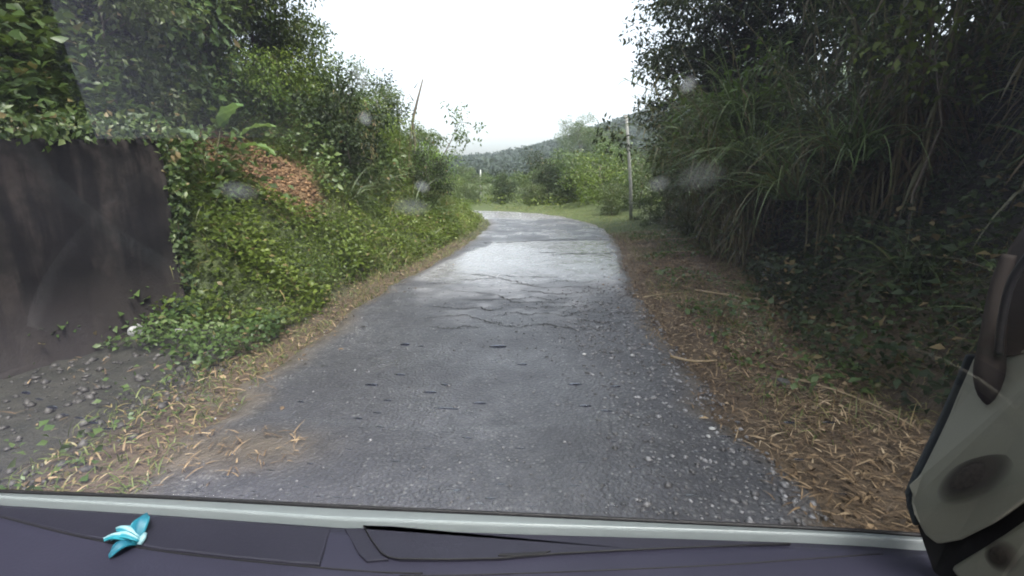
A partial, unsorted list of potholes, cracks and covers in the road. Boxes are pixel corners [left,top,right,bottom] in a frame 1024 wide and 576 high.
crack [424,273,640,330]
